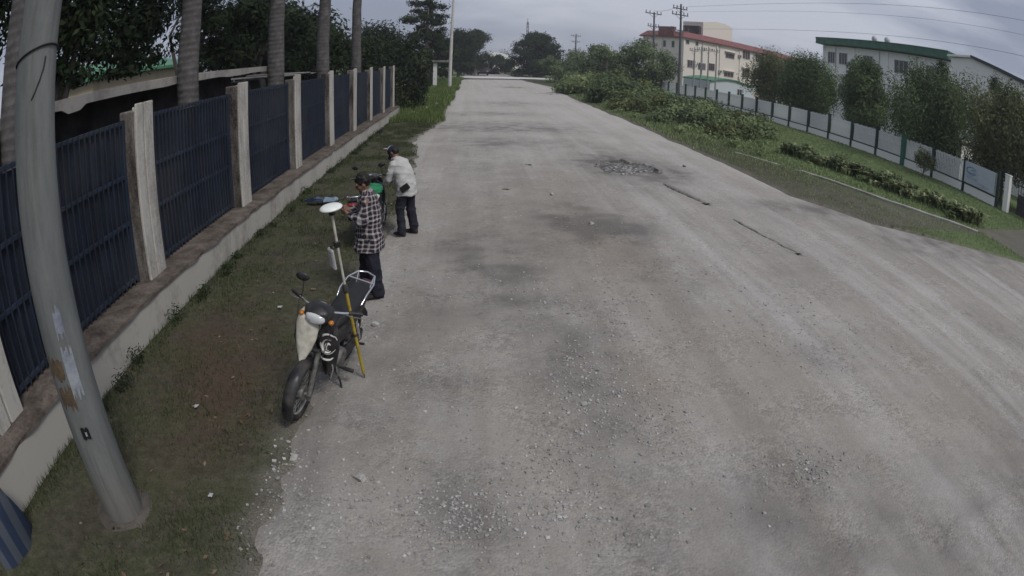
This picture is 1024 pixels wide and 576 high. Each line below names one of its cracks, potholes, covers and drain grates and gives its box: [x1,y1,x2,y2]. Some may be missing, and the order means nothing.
pothole [581,156,673,179]
crack [653,183,802,254]
